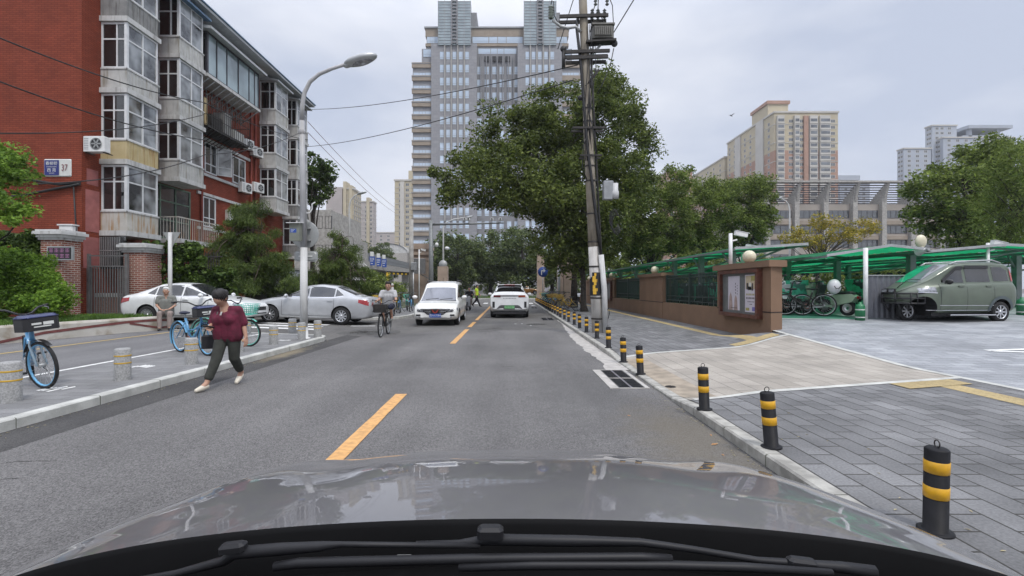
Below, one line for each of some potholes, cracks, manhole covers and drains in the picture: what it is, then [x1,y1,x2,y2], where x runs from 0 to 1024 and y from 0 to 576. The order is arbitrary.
drain grate [592,370,650,389]
